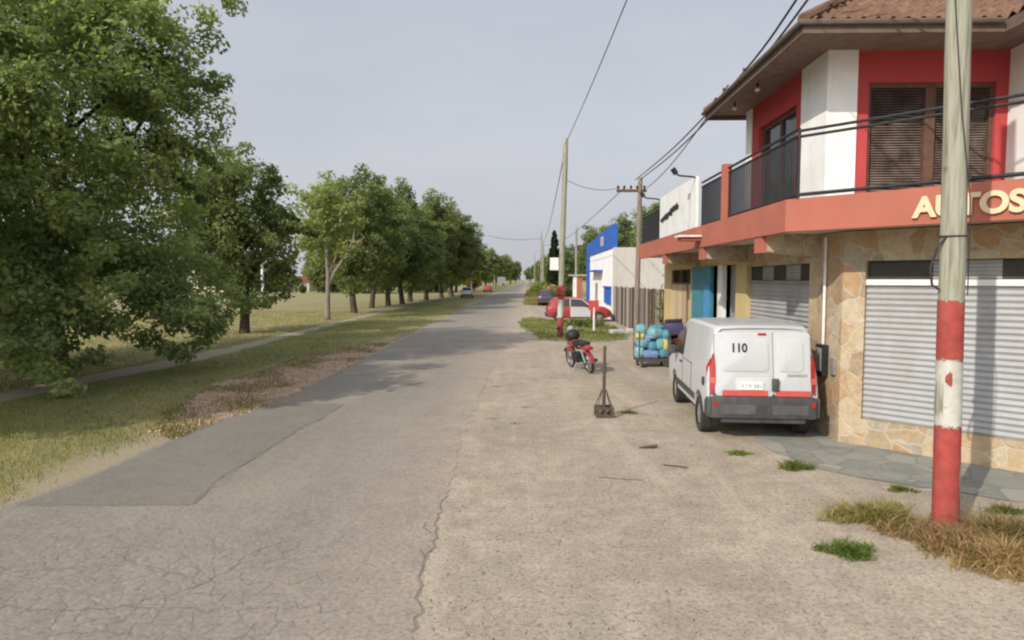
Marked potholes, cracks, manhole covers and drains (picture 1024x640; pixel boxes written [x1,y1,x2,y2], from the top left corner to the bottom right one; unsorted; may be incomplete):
crack [409,495,447,633]
crack [0,515,367,640]
